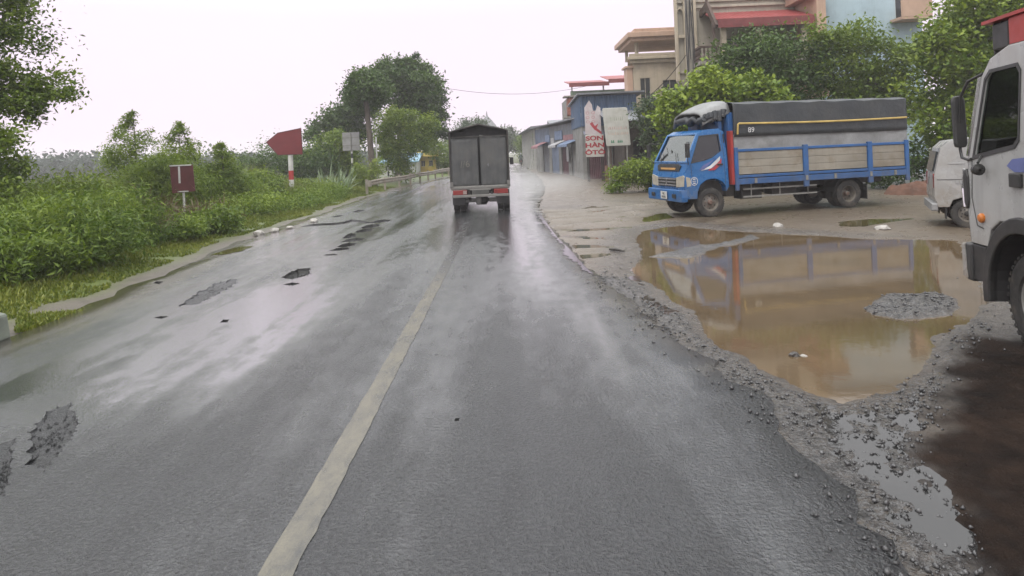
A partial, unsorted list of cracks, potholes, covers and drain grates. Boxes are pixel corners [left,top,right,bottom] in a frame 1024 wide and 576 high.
pothole [281,267,312,279]
pothole [0,438,16,496]
pothole [20,402,79,472]
pothole [178,279,238,306]
